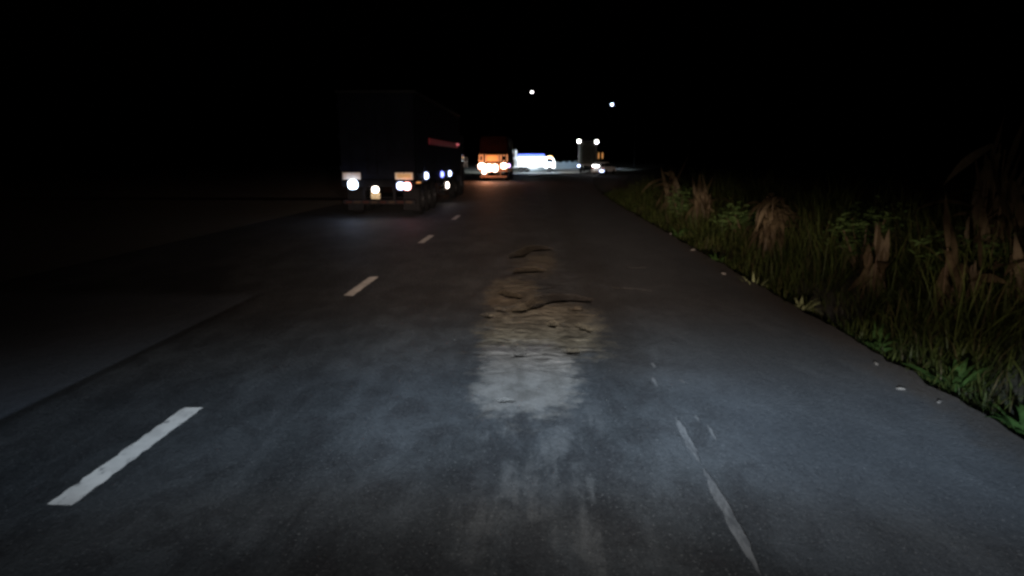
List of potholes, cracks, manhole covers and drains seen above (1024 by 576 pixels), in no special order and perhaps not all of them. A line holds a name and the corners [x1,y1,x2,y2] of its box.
pothole [497,289,523,299]
pothole [509,293,594,313]
pothole [507,245,553,258]
